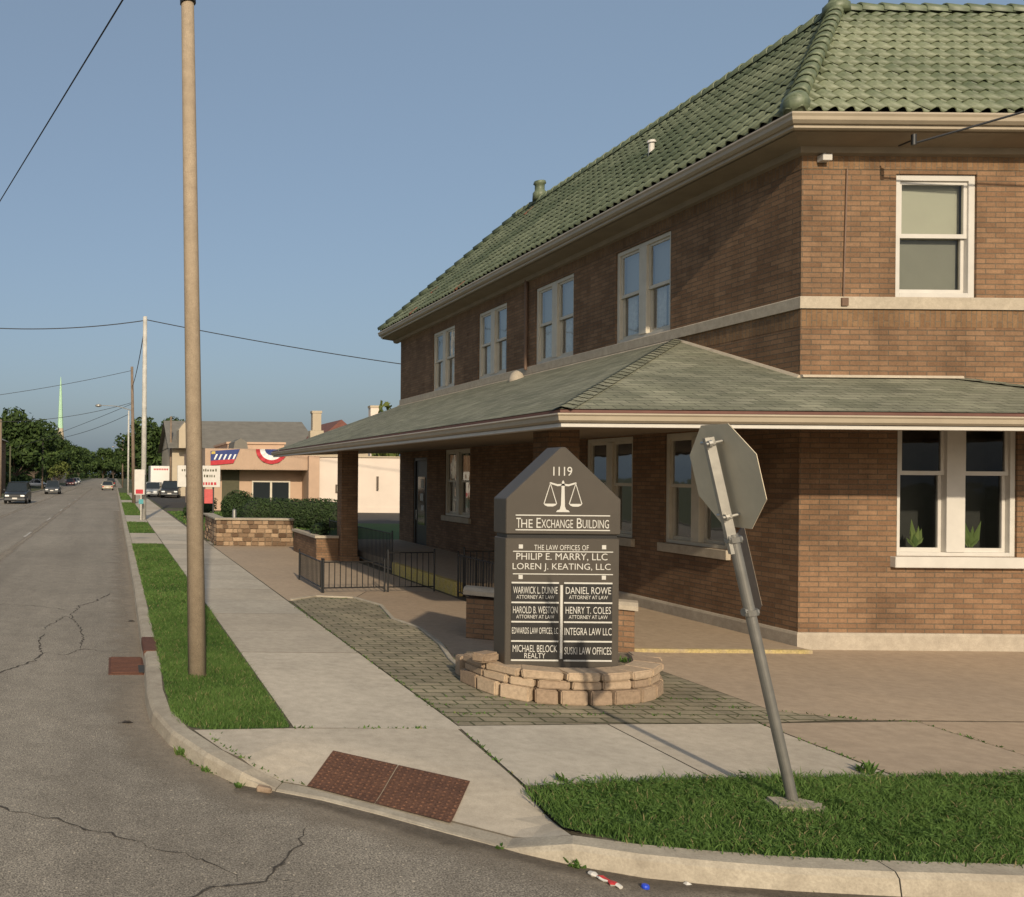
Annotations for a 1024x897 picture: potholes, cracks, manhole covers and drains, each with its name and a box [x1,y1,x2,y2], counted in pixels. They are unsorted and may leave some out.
crack [0,593,110,673]
crack [0,806,305,897]
drain grate [108,637,159,675]
